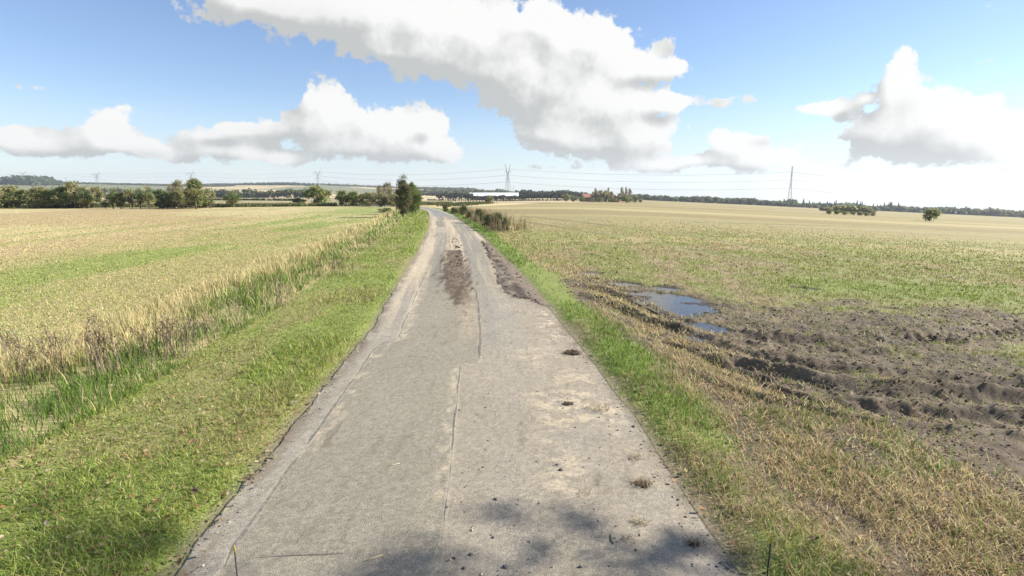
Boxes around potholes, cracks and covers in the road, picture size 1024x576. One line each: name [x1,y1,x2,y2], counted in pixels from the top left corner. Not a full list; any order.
crack [439,289,482,572]
